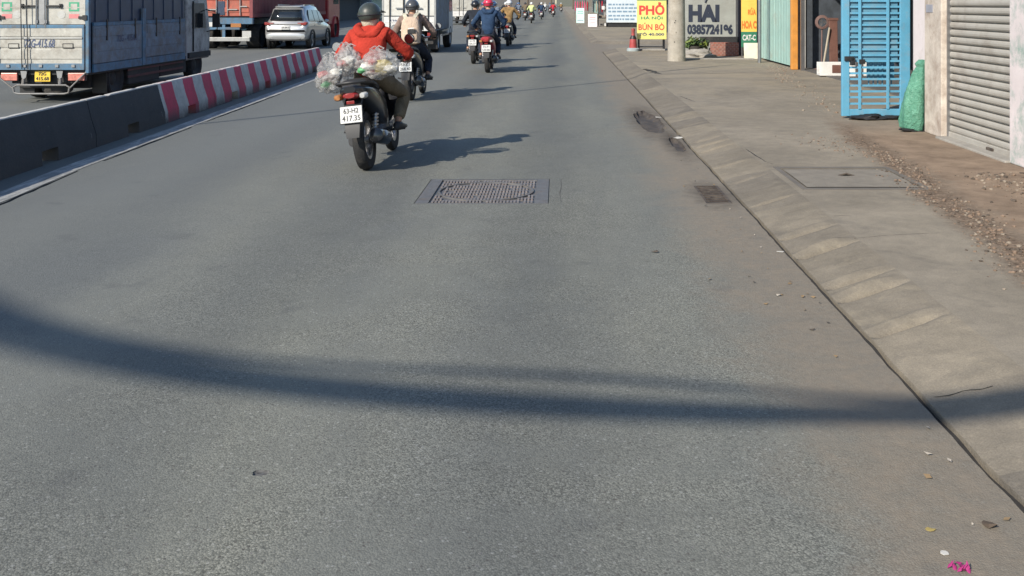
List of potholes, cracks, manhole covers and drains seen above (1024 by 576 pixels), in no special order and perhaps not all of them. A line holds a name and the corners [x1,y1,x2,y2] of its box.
pothole [669,137,686,152]
drain grate [694,186,732,203]
pothole [633,110,665,133]
manhole cover [414,179,550,204]
manhole cover [773,167,933,190]
